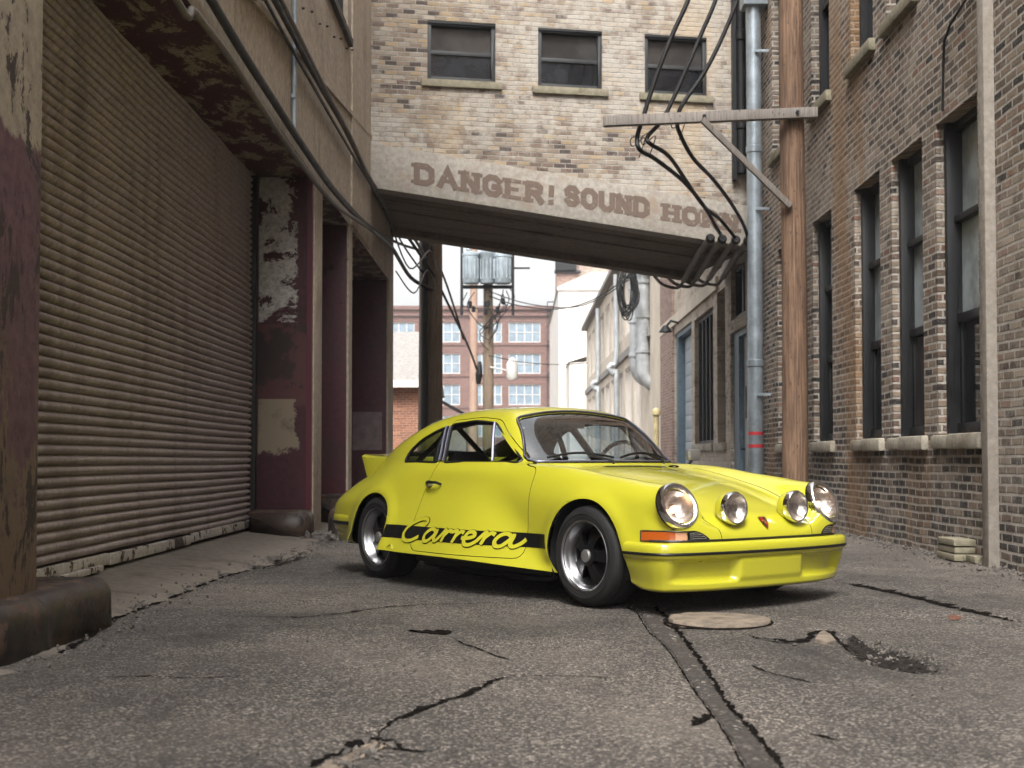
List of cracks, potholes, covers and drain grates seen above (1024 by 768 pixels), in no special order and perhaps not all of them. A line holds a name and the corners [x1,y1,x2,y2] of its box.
crack [307,640,624,767]
crack [226,603,469,617]
crack [841,582,1021,622]
crack [627,606,850,768]
manhole cover [663,612,774,630]
pothole [838,635,938,674]
